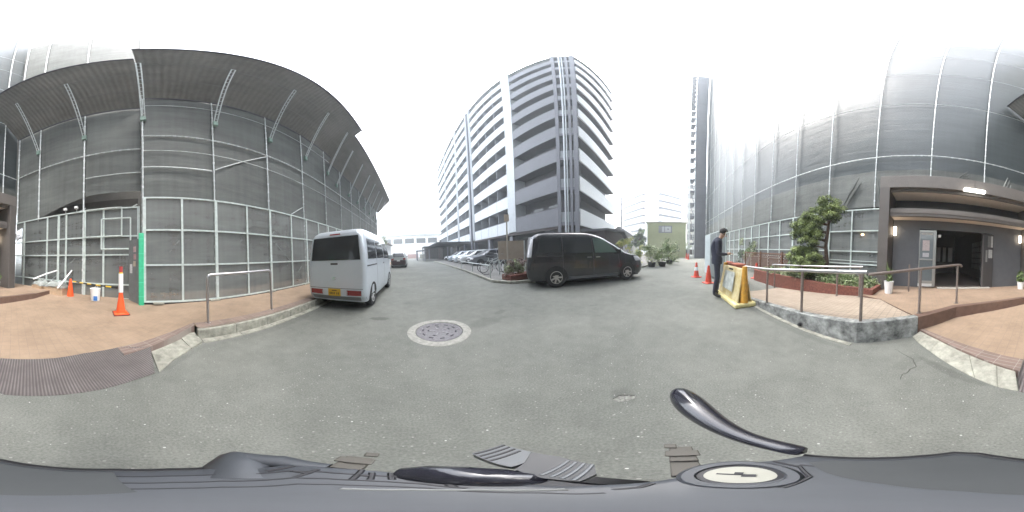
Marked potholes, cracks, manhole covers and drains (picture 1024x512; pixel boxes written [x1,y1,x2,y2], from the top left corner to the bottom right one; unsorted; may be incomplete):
manhole cover [407,320,471,347]
